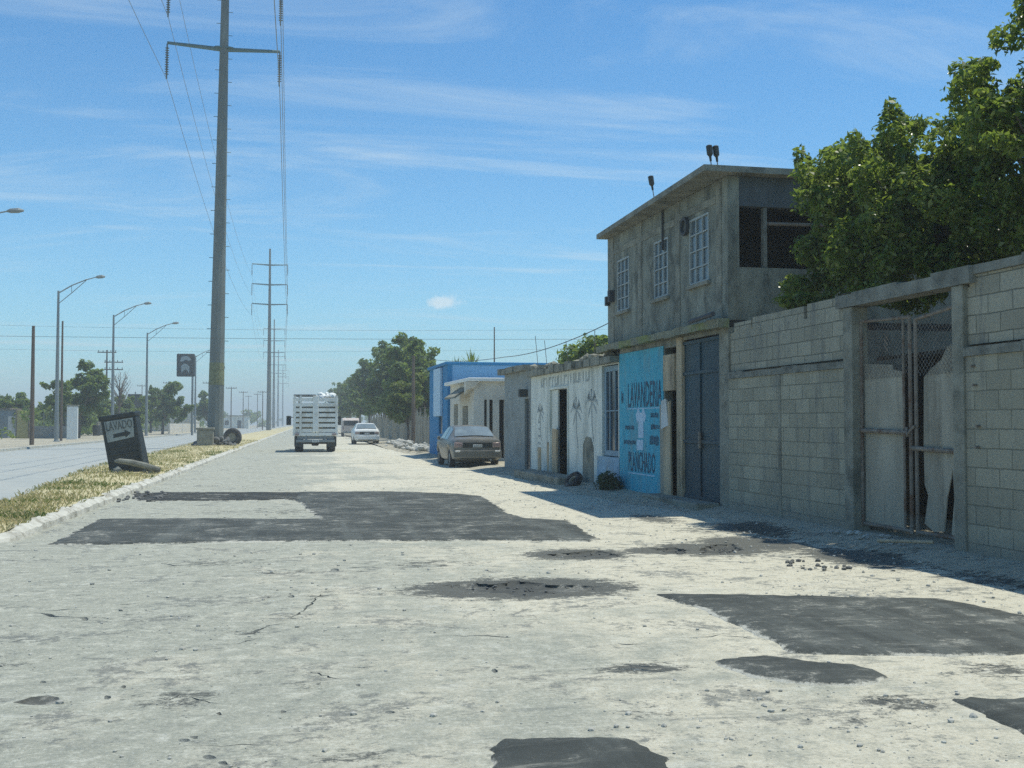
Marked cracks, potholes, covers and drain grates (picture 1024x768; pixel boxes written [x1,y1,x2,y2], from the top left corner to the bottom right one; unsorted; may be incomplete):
pothole [650,547,687,555]
crack [235,594,321,644]
pothole [13,695,60,705]
pothole [545,550,620,558]
pothole [698,544,744,555]
pothole [444,580,603,598]
crack [40,594,80,618]
